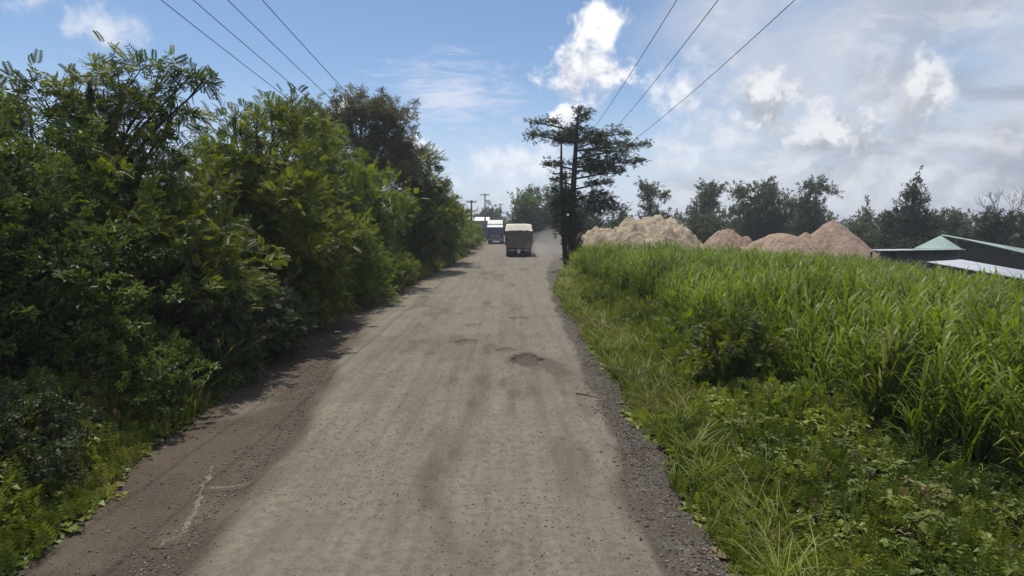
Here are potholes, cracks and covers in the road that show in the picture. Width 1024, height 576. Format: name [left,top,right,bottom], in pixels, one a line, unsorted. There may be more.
pothole [489,346,521,354]
pothole [448,338,484,346]
crack [150,465,253,549]
pothole [501,349,554,371]
